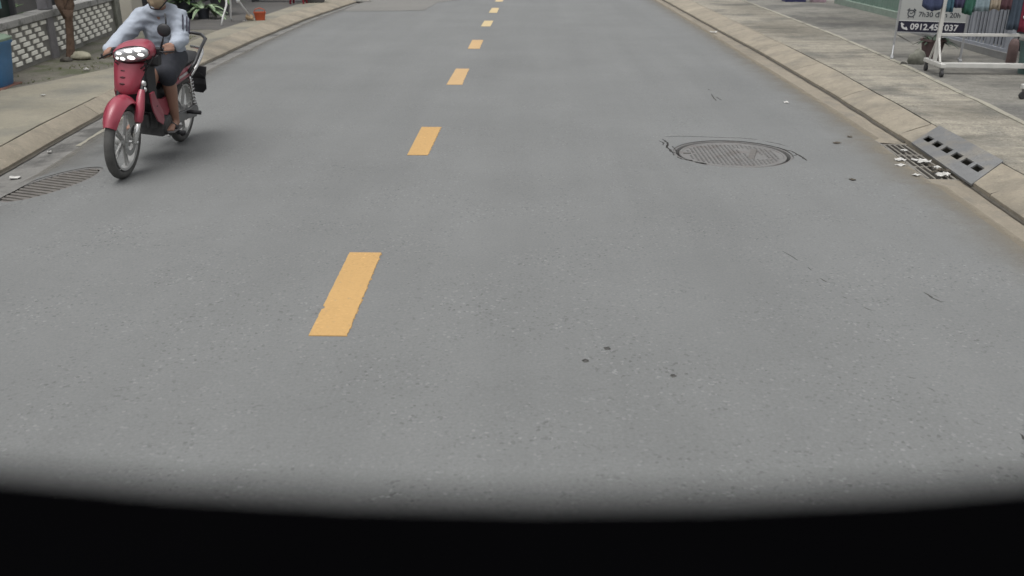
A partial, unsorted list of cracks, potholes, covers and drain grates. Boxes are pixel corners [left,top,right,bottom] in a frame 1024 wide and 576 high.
drain grate [882,144,961,181]
drain grate [912,125,1003,194]
manhole cover [673,141,793,168]
